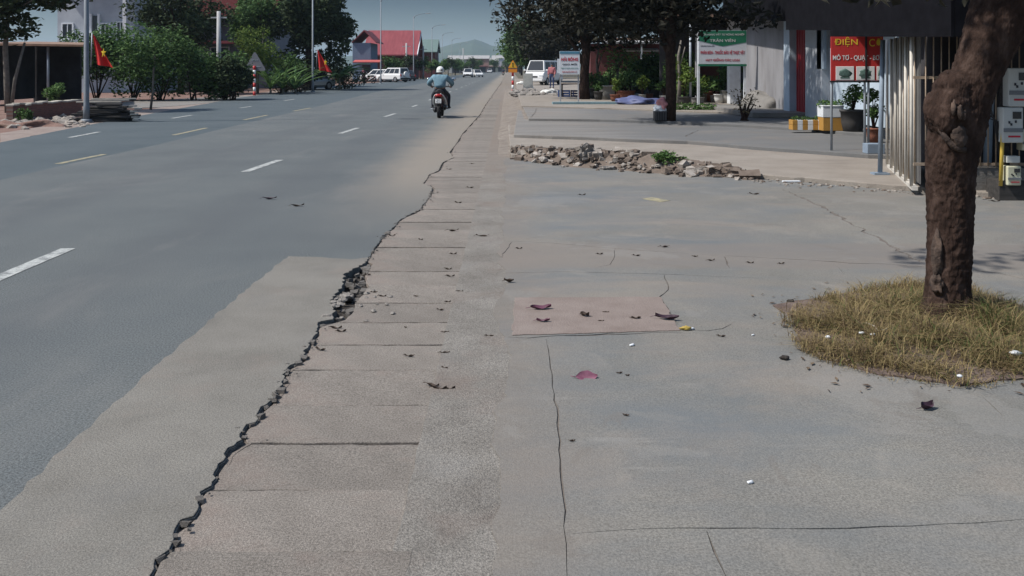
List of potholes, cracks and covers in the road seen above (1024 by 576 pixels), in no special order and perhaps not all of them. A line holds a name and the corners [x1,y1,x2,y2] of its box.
crack [154,326,326,572]
crack [789,192,921,262]
crack [368,110,484,260]
